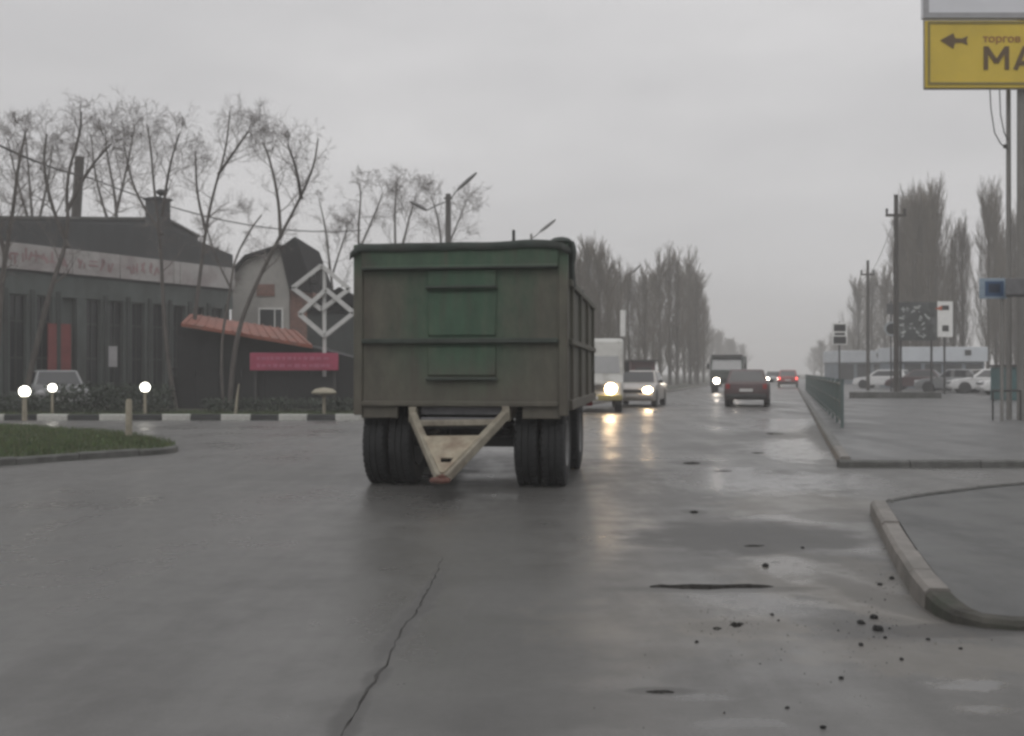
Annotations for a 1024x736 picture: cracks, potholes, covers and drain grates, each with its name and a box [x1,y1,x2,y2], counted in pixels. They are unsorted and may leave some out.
crack [341,557,443,736]
